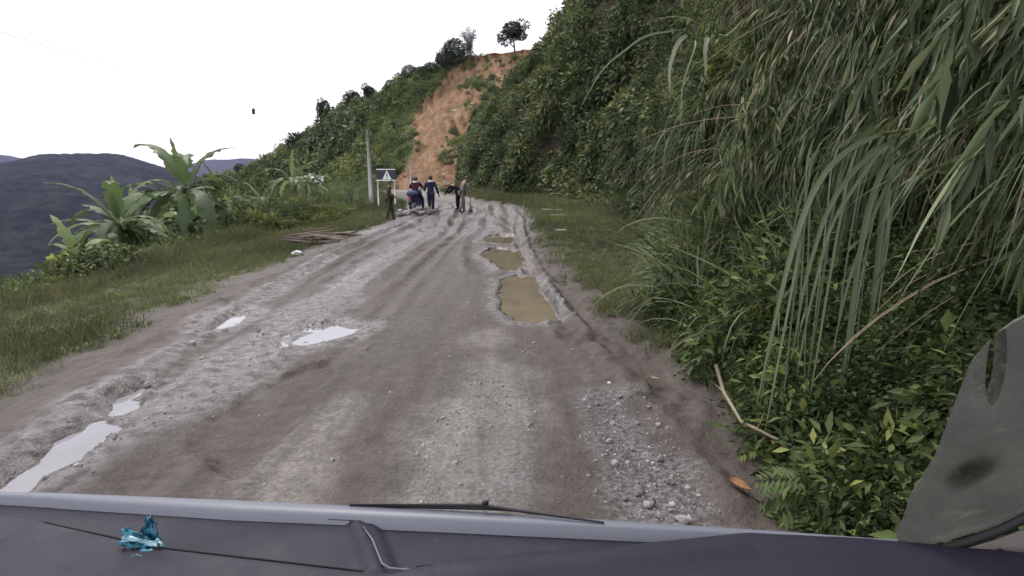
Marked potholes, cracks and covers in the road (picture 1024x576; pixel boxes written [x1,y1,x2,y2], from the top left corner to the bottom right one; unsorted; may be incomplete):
pothole [480,247,527,270]
pothole [196,307,258,332]
pothole [0,373,169,492]
pothole [496,273,559,323]
pothole [259,319,373,352]
pothole [478,233,518,244]
